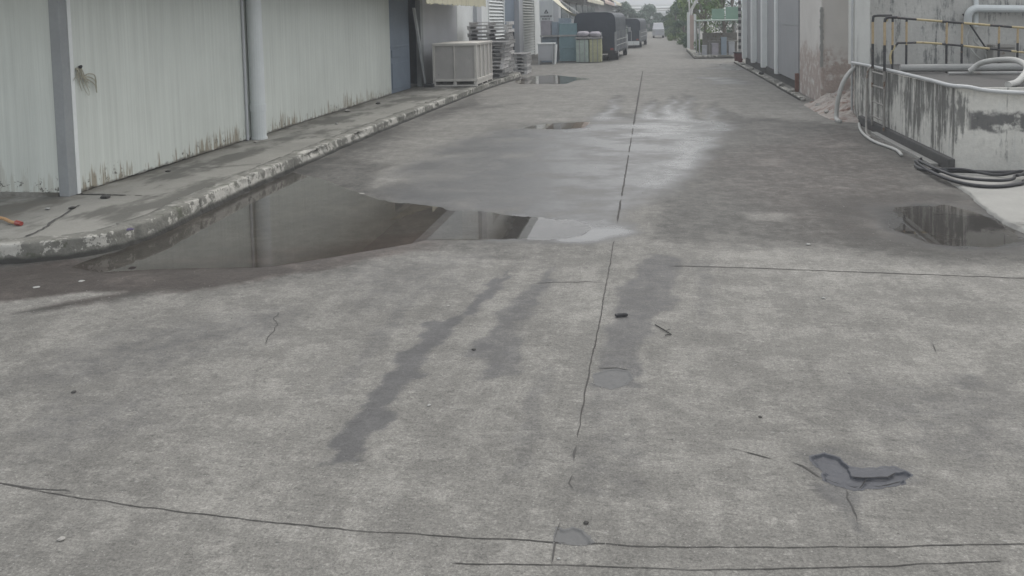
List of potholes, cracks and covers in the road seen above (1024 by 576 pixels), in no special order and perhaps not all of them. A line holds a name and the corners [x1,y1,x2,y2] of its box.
pothole [804,451,913,494]
crack [732,448,821,478]
